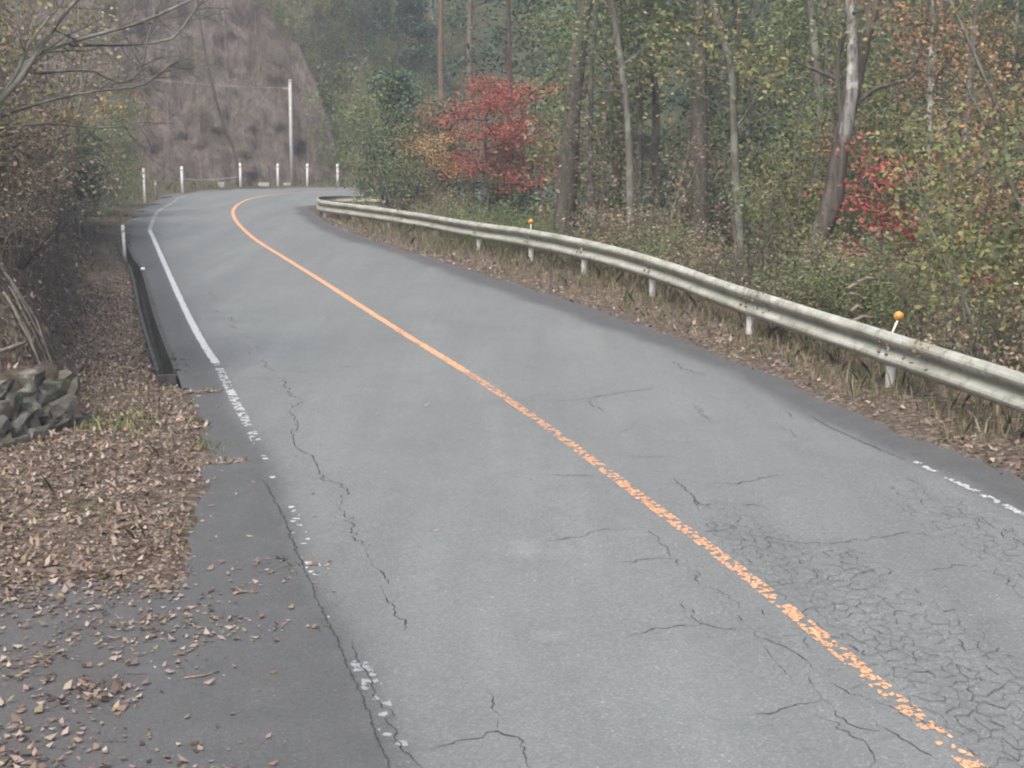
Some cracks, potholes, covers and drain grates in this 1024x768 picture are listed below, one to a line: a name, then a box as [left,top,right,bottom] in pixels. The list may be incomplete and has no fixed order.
crack [352,643,528,767]
crack [693,500,1024,768]
crack [283,379,407,632]
crack [776,476,1024,598]
